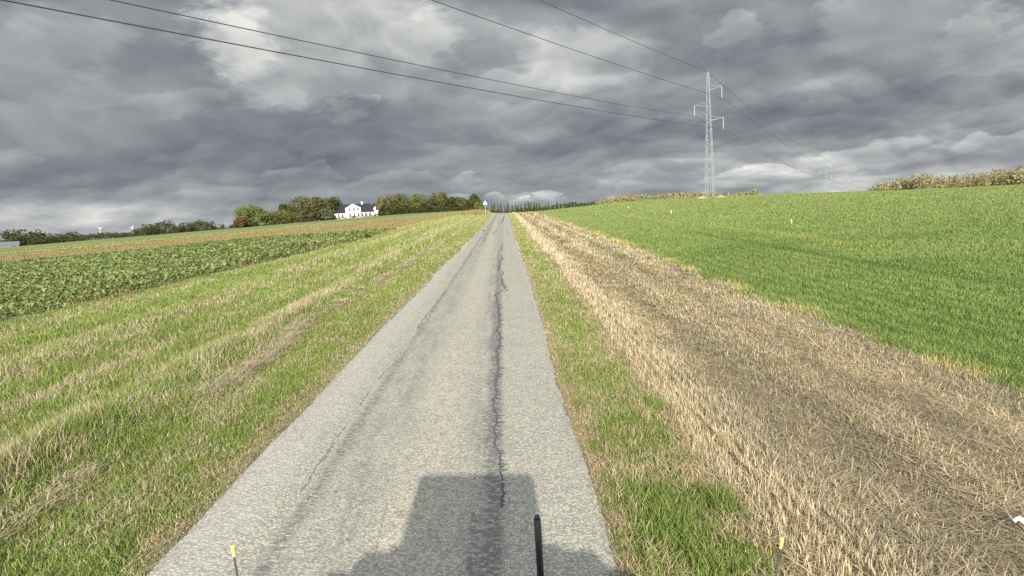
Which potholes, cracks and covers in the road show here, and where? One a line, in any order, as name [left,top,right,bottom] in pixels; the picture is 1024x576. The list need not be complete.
crack [300,424,348,492]
crack [491,216,509,508]
crack [417,240,480,329]
